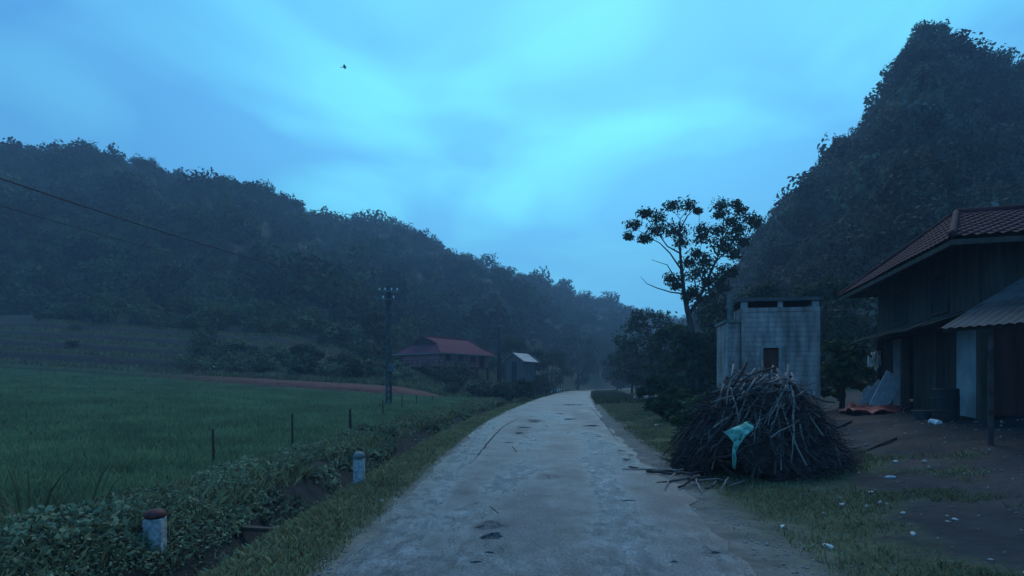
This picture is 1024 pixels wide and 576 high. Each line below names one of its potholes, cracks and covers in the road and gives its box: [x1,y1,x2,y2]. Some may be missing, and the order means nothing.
pothole [474,520,504,530]
crack [475,418,529,459]
